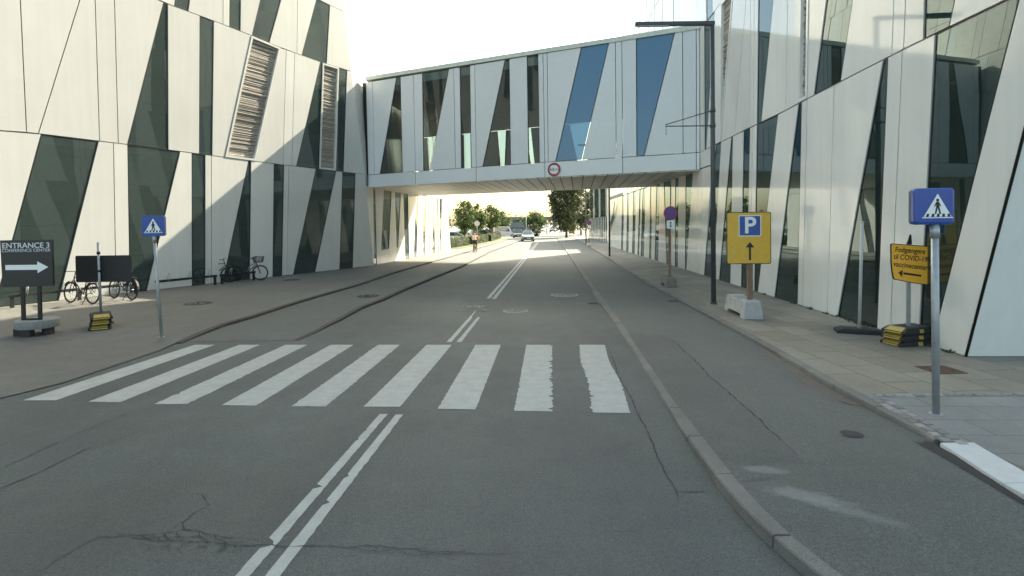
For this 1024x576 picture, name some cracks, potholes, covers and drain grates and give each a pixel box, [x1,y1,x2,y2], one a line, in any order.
crack [0,413,134,488]
crack [609,349,702,510]
crack [40,492,526,571]
